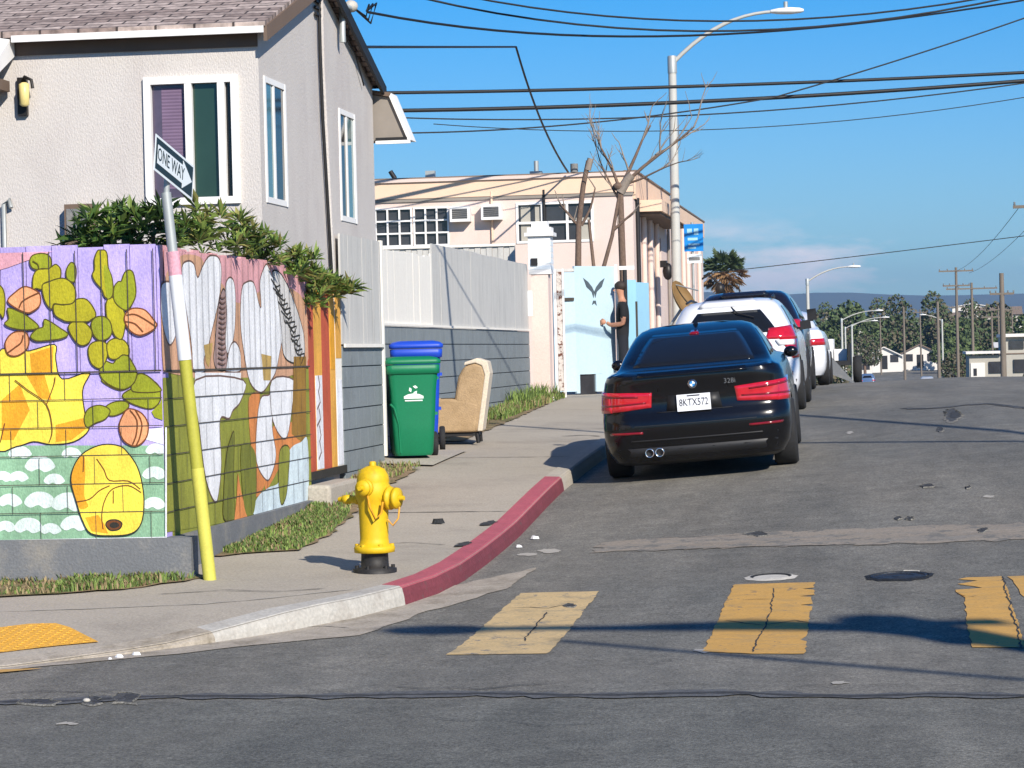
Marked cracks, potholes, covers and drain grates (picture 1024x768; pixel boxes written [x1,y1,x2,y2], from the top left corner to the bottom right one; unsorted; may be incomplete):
crack [516,605,560,641]
utility cover [744,573,798,581]
